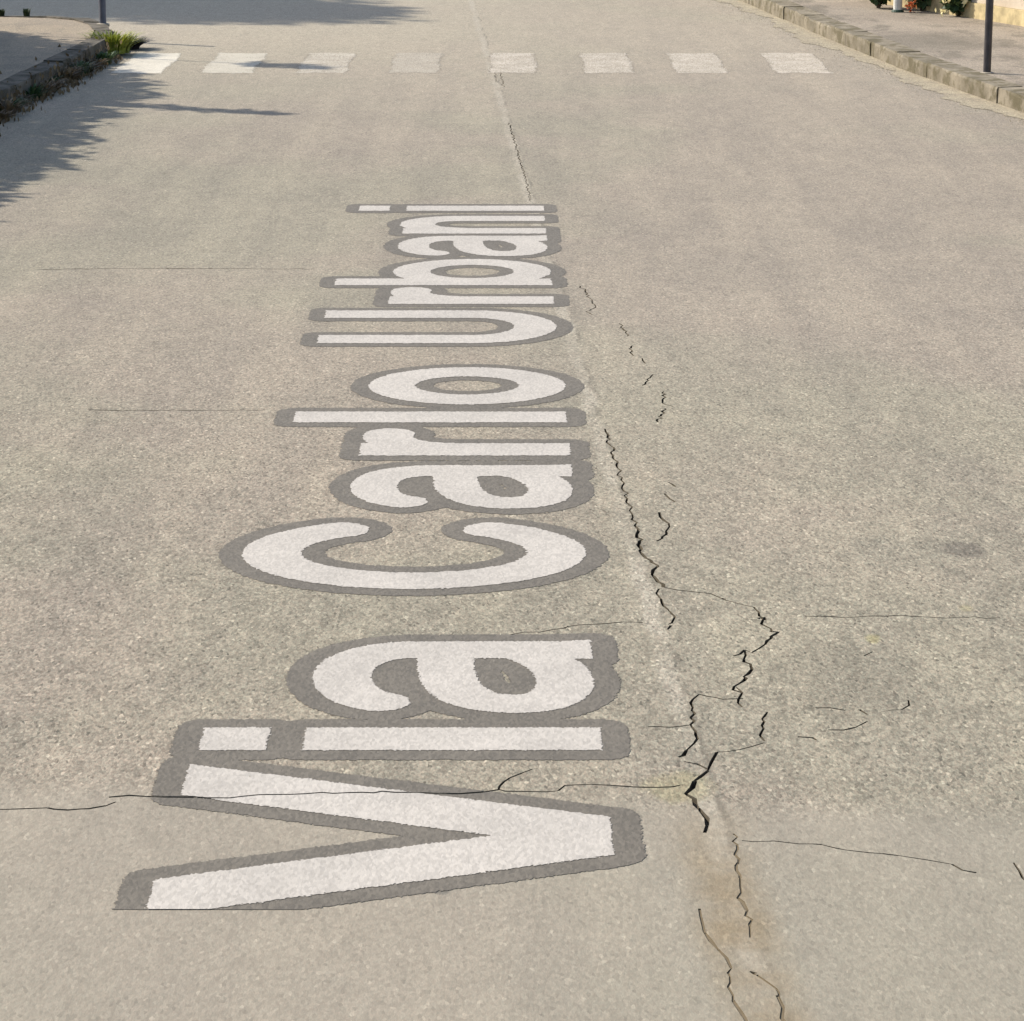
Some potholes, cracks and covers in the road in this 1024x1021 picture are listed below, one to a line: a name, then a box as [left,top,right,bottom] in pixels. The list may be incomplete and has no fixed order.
crack [494,73,531,201]
crack [0,429,977,1021]
crack [579,286,671,422]
